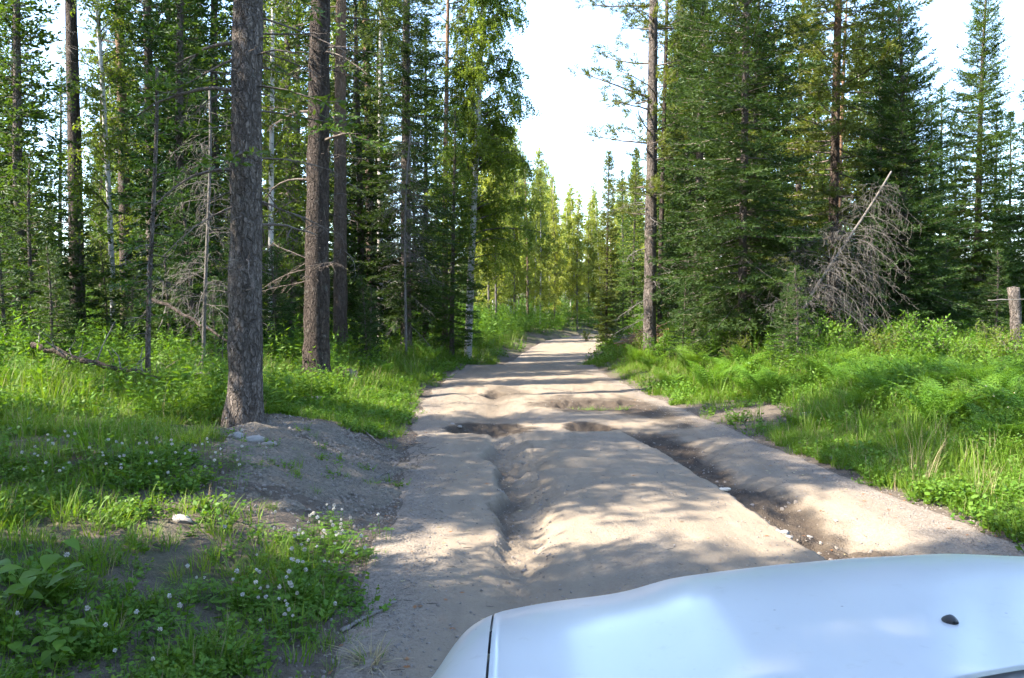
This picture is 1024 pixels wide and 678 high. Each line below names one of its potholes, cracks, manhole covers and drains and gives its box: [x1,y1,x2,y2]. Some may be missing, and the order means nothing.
pothole [480,389,512,400]
pothole [564,421,620,432]
pothole [444,422,536,439]
pothole [525,398,645,411]
